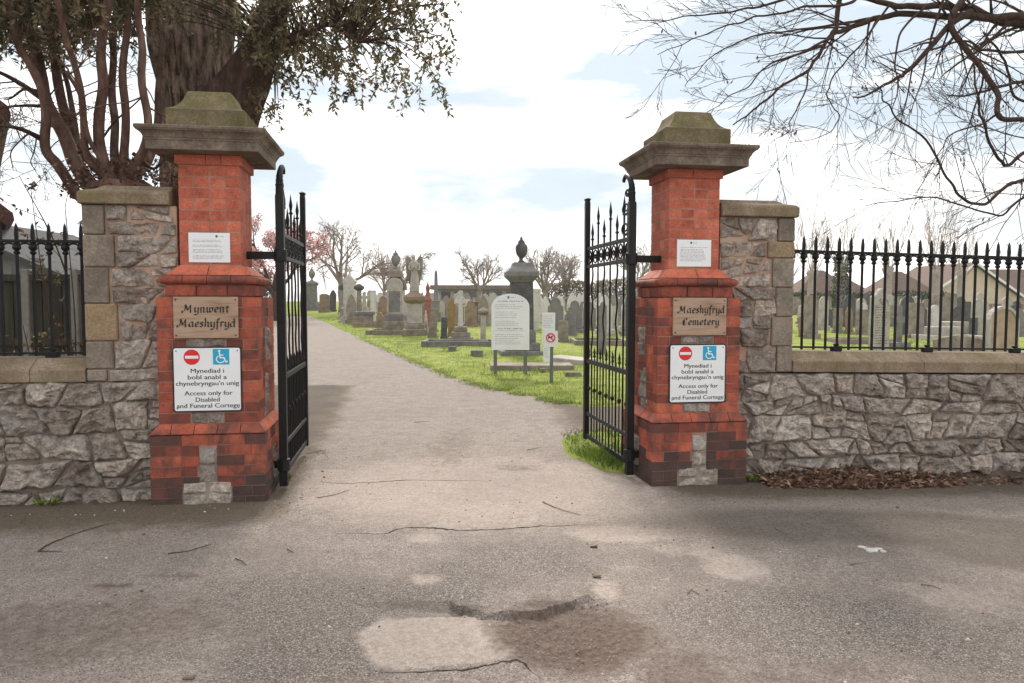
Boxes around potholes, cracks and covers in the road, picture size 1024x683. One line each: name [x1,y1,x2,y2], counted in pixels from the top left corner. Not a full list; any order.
crack [338,525,570,534]
crack [375,659,540,678]
